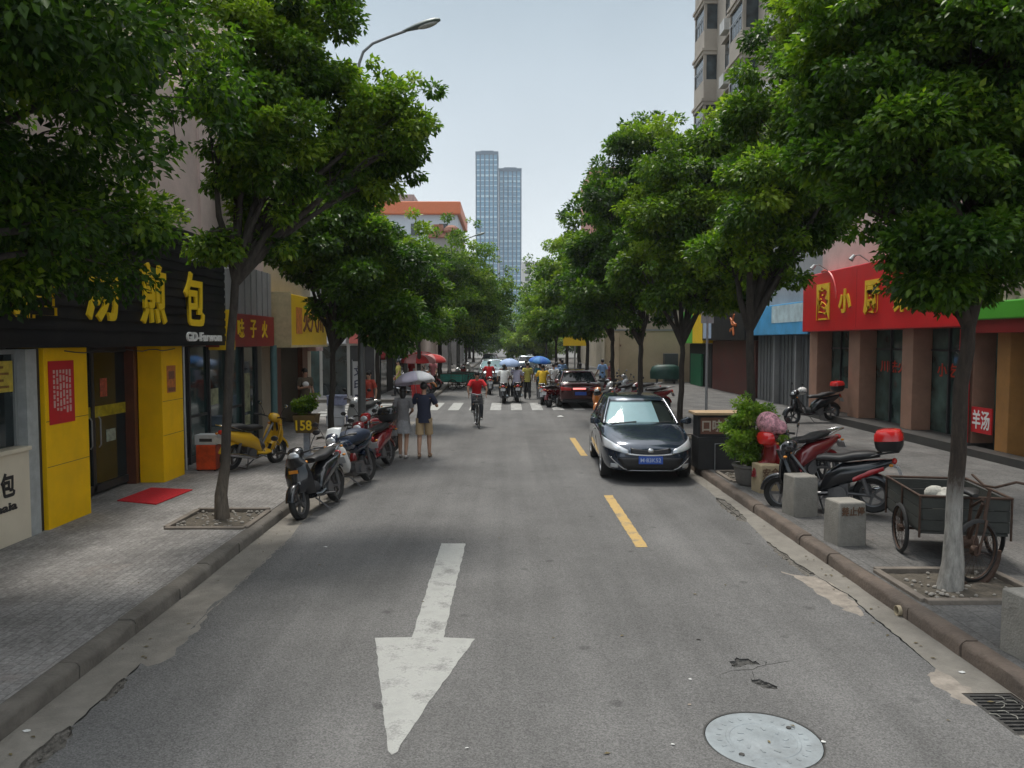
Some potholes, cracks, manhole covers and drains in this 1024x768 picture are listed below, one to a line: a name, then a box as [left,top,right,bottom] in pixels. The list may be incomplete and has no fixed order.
pothole [751,679,778,689]
drain grate [963,694,1024,735]
manhole cover [703,712,826,768]
pothole [729,657,761,667]
